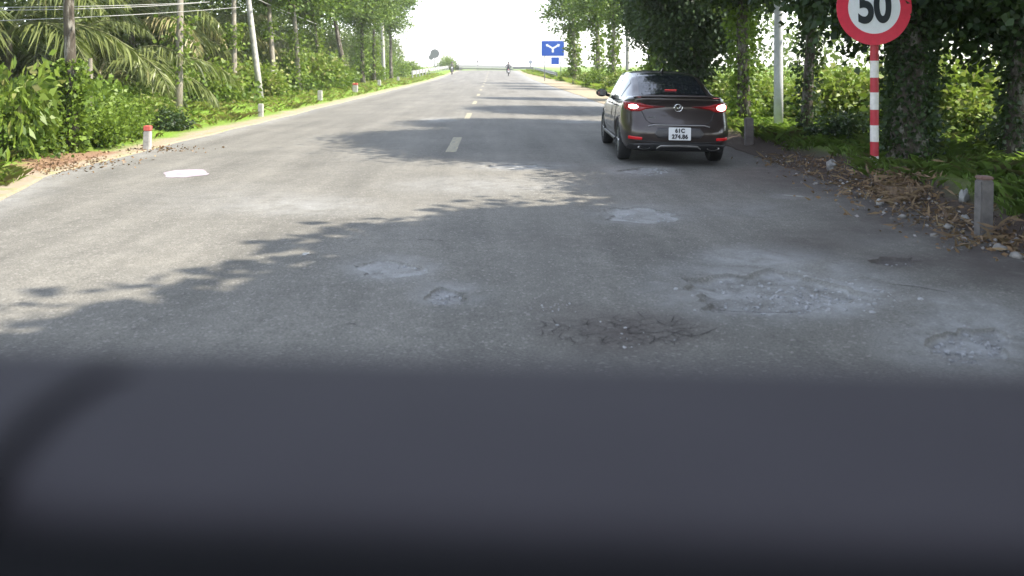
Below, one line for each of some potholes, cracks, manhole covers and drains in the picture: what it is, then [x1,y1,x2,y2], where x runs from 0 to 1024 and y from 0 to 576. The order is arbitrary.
pothole [353,260,430,279]
pothole [423,287,467,305]
pothole [923,325,1018,365]
crack [531,302,716,349]
pothole [867,257,923,267]
pothole [674,268,924,316]
